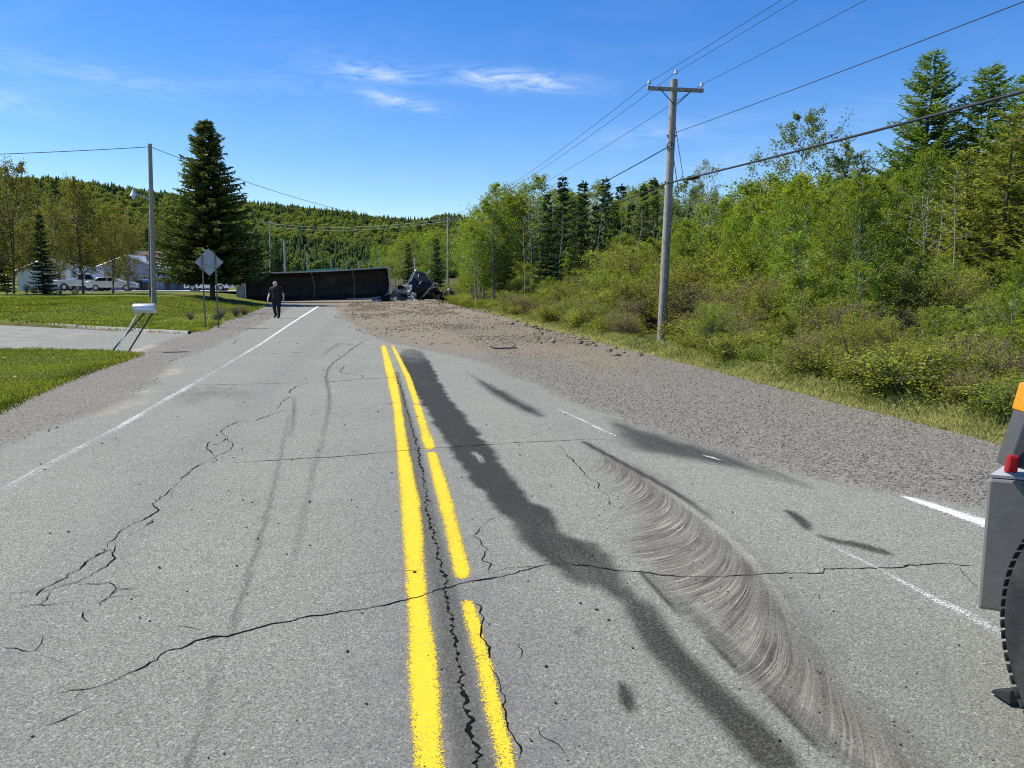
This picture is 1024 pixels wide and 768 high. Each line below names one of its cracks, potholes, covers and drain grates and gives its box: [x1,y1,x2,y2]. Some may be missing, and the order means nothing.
crack [474,602,566,757]
crack [2,383,622,622]
crack [44,517,968,726]
